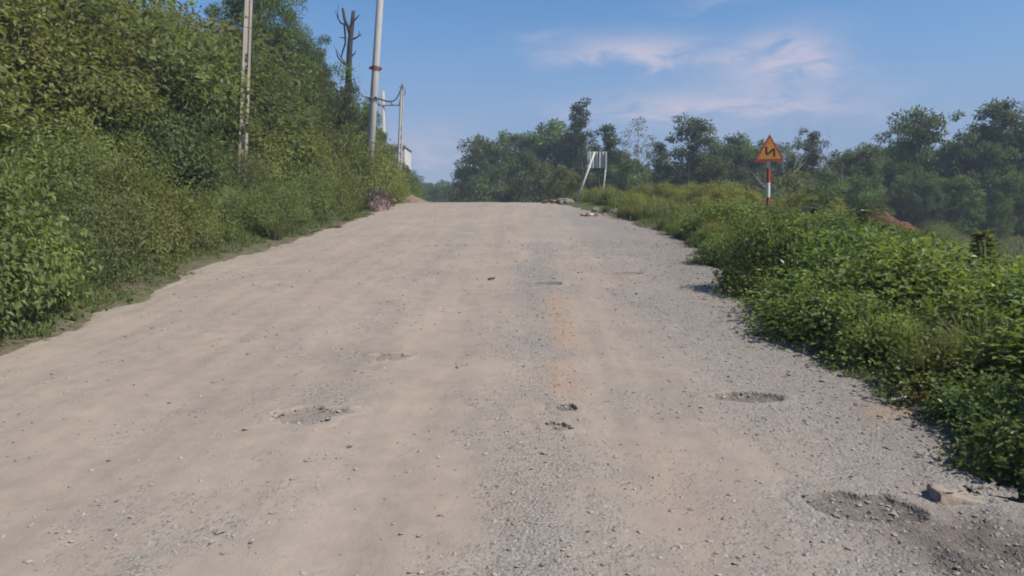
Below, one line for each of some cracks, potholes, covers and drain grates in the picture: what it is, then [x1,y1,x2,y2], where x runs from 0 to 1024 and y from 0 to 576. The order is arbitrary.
pothole [545,400,588,416]
pothole [780,484,951,533]
pothole [253,401,366,430]
pothole [689,388,798,407]
pothole [361,351,420,364]
pothole [532,418,585,436]
